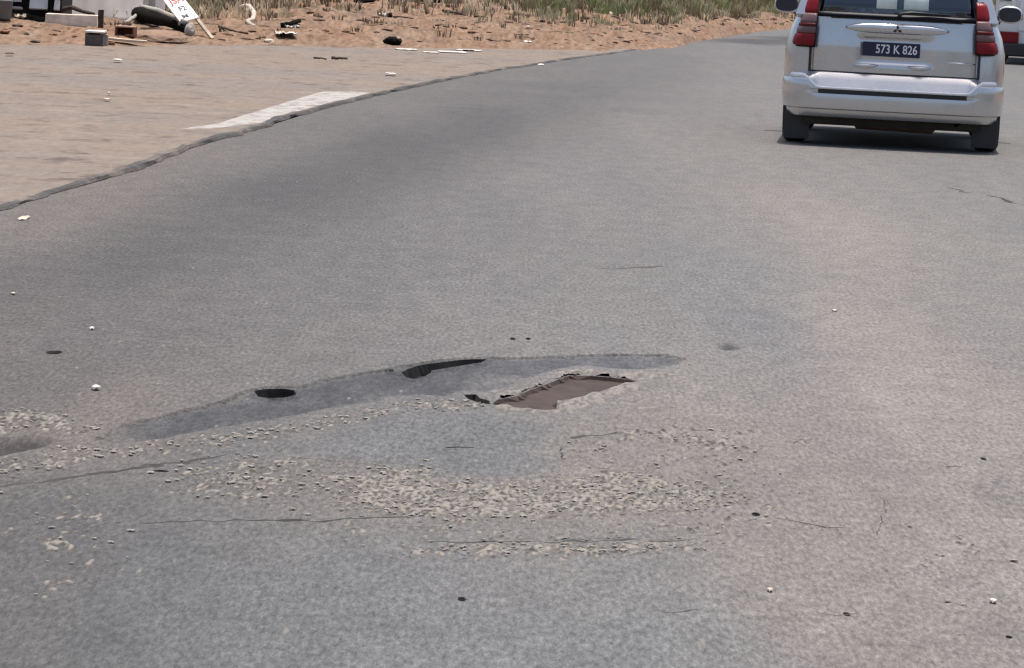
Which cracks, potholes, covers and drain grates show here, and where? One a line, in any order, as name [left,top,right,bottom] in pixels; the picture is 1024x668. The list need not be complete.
crack [559,432,624,458]
crack [774,518,845,528]
crack [951,188,1022,205]
crack [0,454,228,487]
pothole [91,353,687,444]
crack [142,516,408,524]
